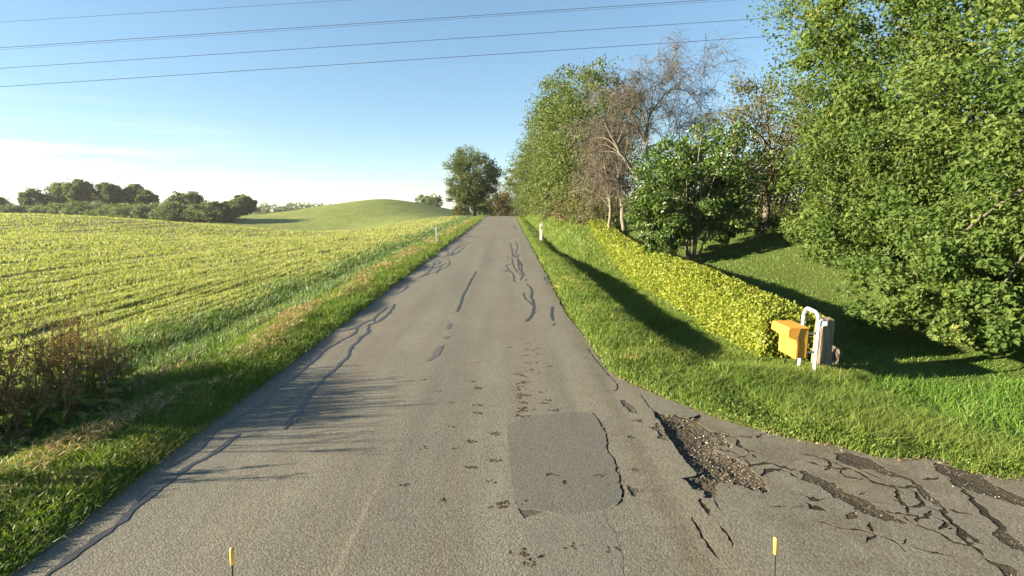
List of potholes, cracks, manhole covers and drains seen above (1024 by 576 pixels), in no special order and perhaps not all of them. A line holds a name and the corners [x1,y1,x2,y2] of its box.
pothole [648,408,778,498]
crack [720,435,1010,559]
crack [691,499,733,561]
crack [588,349,653,411]
